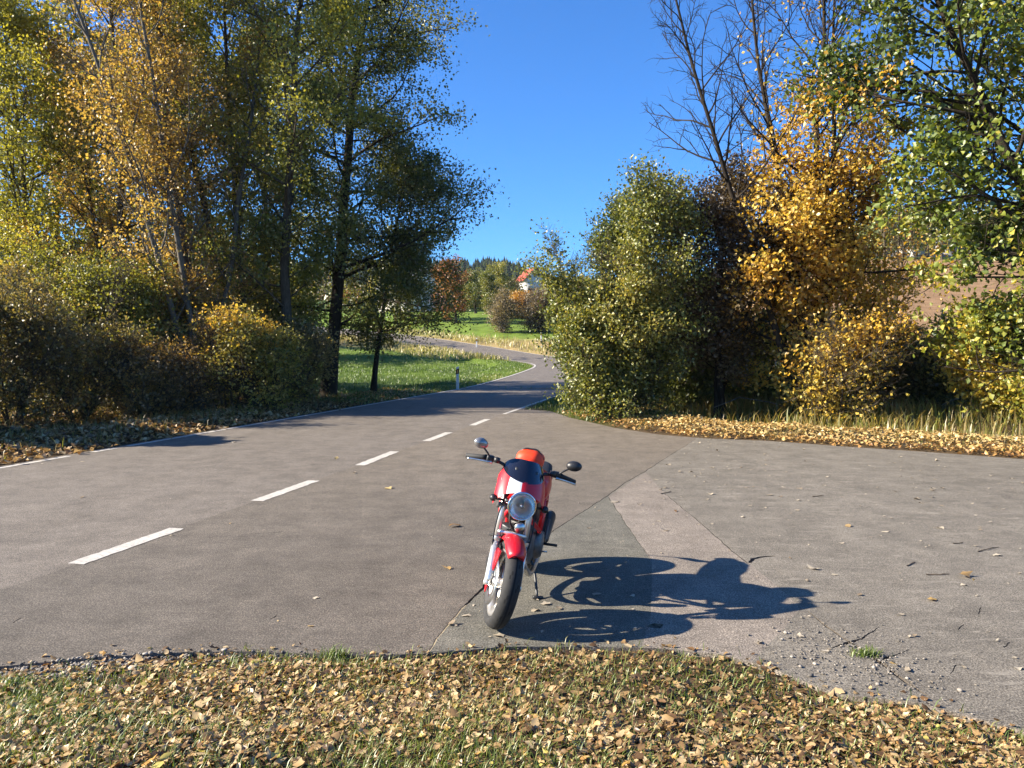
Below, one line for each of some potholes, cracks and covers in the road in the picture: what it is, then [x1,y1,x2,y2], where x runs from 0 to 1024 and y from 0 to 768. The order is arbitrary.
crack [809,612,930,697]
